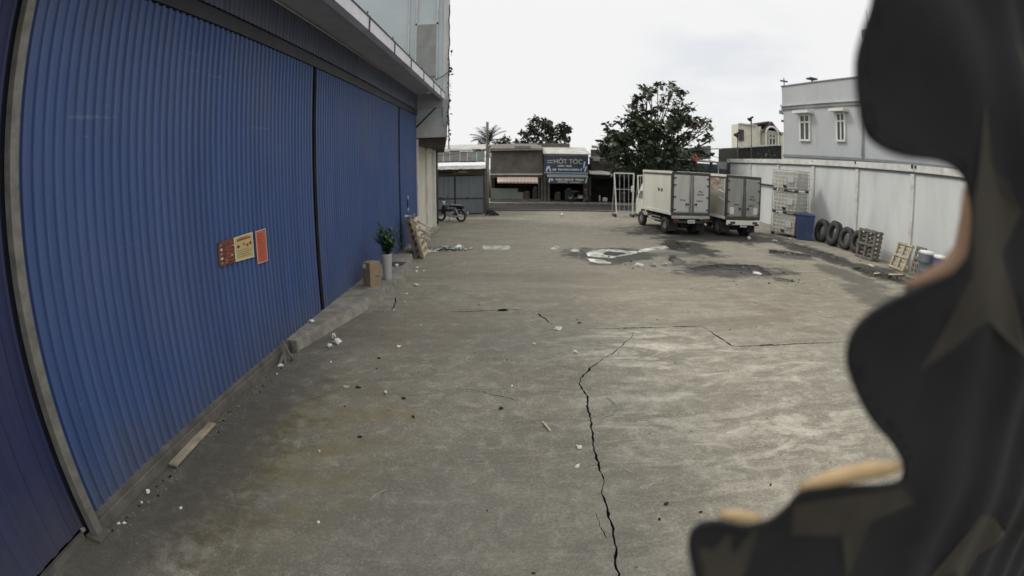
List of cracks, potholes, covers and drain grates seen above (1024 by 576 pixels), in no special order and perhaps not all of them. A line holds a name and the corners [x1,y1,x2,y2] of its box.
crack [579,326,847,576]
pothole [689,264,774,276]
crack [448,309,550,323]
